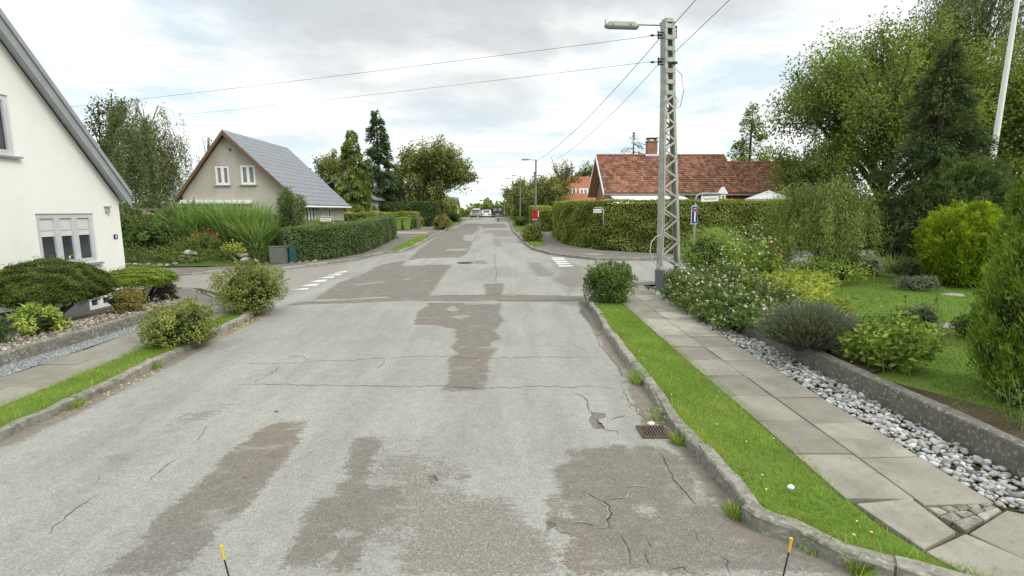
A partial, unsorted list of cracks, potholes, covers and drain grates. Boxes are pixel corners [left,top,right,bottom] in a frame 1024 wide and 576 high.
crack [241,290,645,434]
drain grate [636,425,671,439]
crack [556,452,695,568]
pothole [589,412,606,429]
